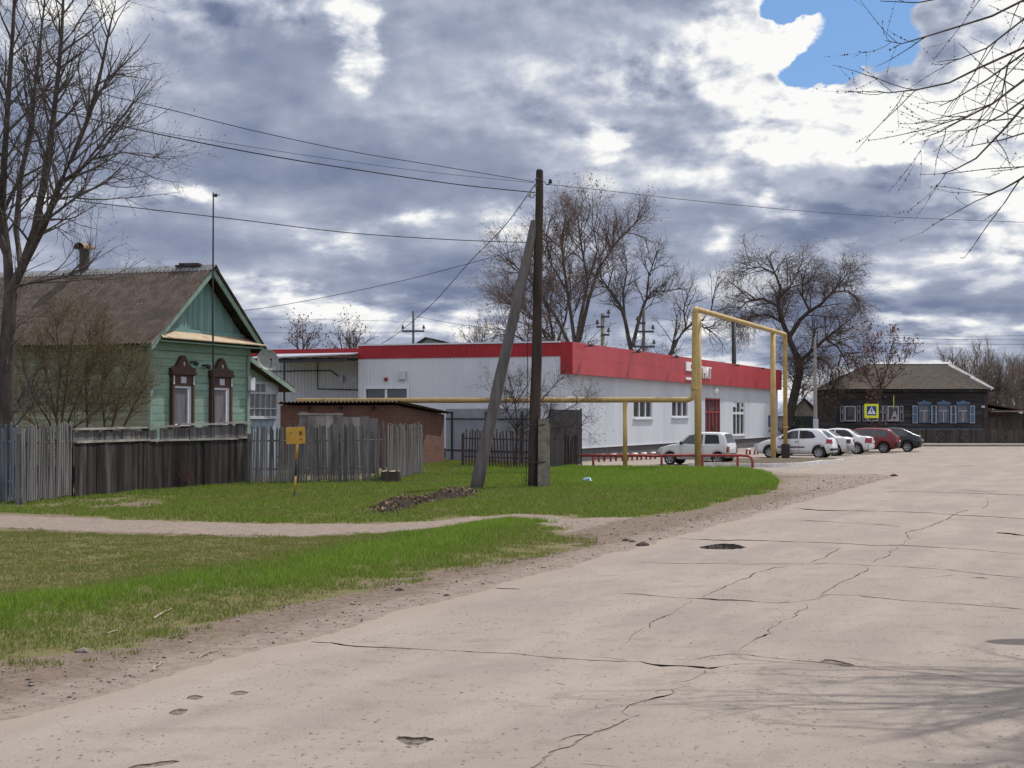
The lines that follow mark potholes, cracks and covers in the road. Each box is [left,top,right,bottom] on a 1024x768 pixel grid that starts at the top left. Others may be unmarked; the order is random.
pothole [129,760,179,768]
pothole [396,736,434,746]
crack [317,498,1018,768]
